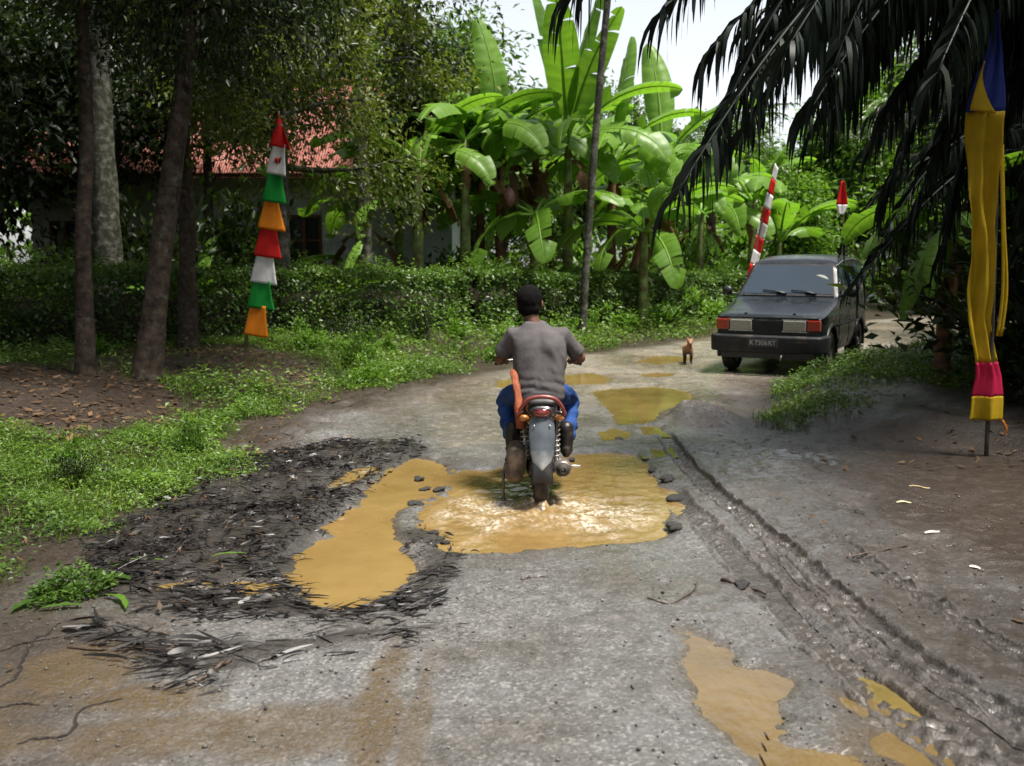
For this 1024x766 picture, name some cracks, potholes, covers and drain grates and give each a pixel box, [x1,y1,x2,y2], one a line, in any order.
pothole [587,385,700,424]
pothole [392,450,685,553]
pothole [276,456,473,613]
pothole [858,677,922,720]
pothole [665,622,810,766]
pothole [593,426,635,442]
crack [0,623,122,744]
pothole [820,685,891,719]
pothole [634,423,670,437]
pothole [640,446,678,459]
